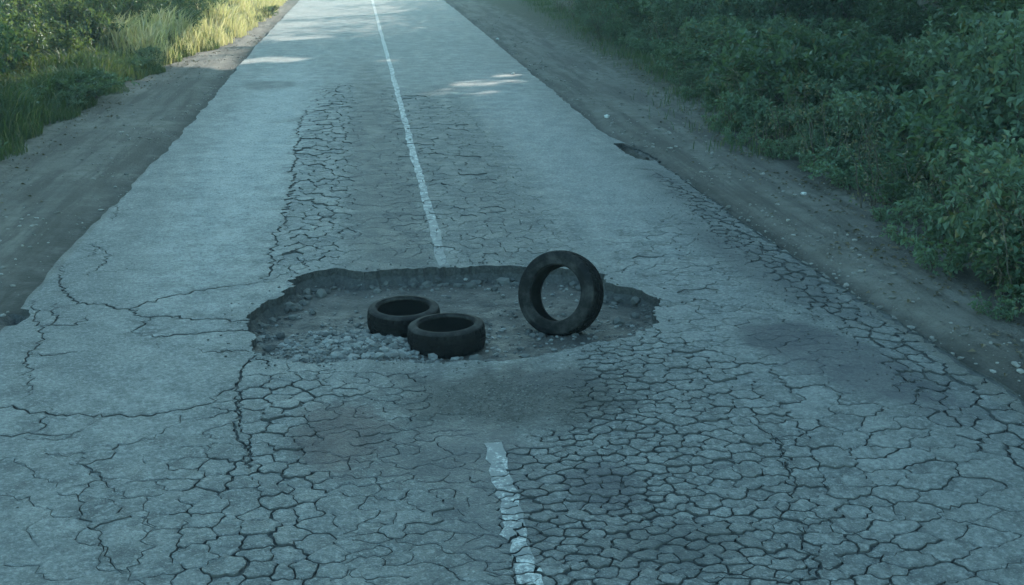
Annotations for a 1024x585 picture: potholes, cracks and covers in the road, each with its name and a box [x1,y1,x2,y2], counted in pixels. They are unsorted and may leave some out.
crack [367,95,598,268]
pothole [613,143,661,163]
crack [0,164,1024,585]
pothole [245,265,660,364]
